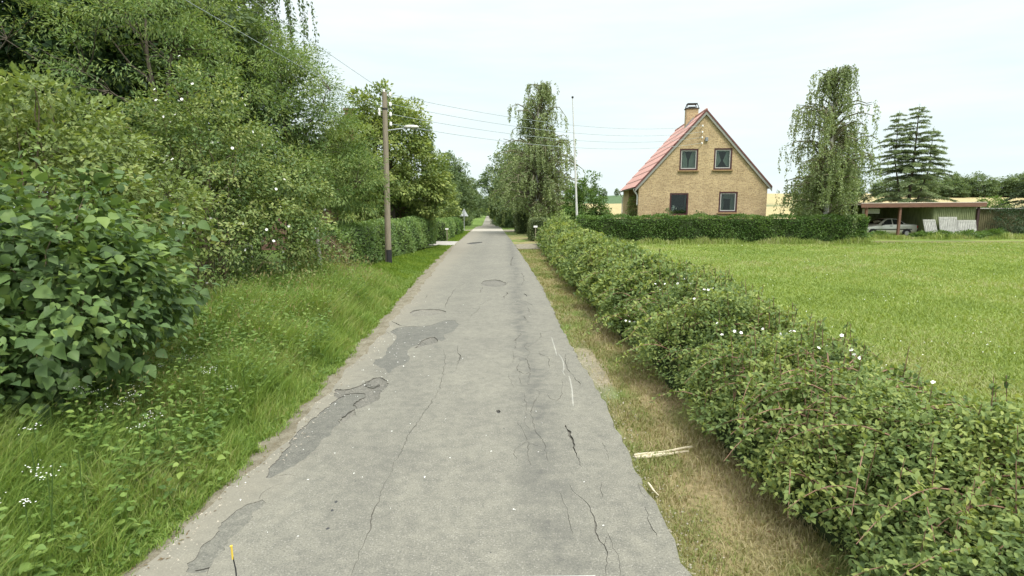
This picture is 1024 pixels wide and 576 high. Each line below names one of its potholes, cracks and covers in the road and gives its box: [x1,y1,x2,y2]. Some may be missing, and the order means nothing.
crack [496,257,580,465]
crack [559,484,621,574]
crack [565,425,582,467]
